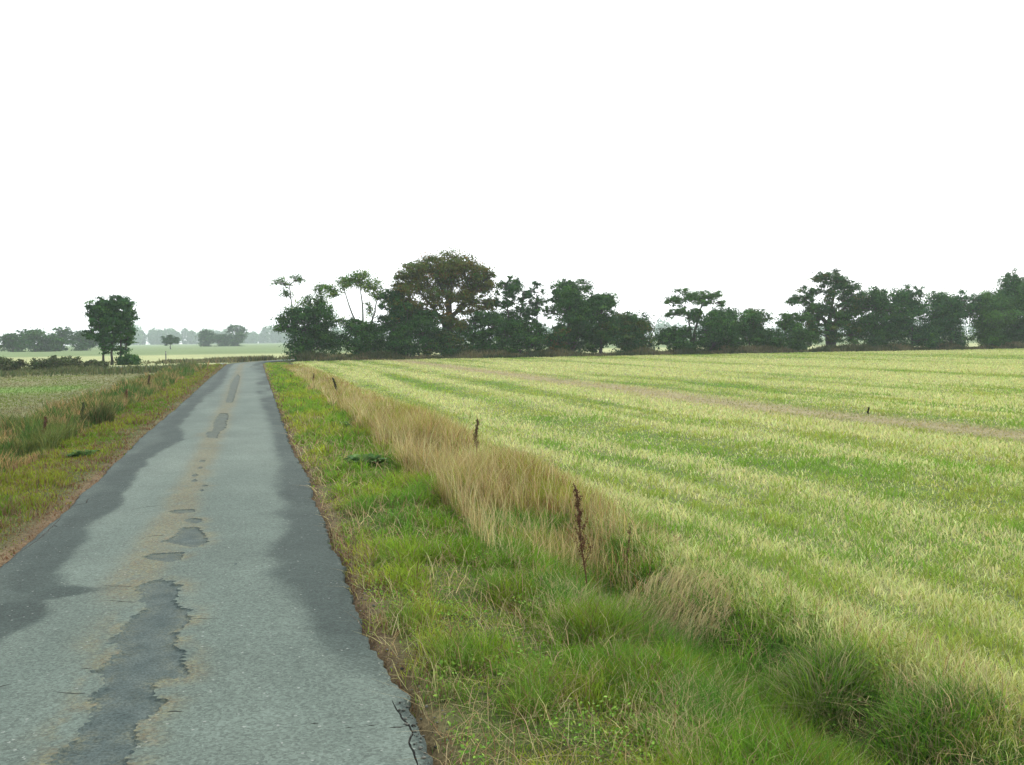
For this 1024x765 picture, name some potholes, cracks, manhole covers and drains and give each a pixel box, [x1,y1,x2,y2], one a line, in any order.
crack [311,701,418,765]
